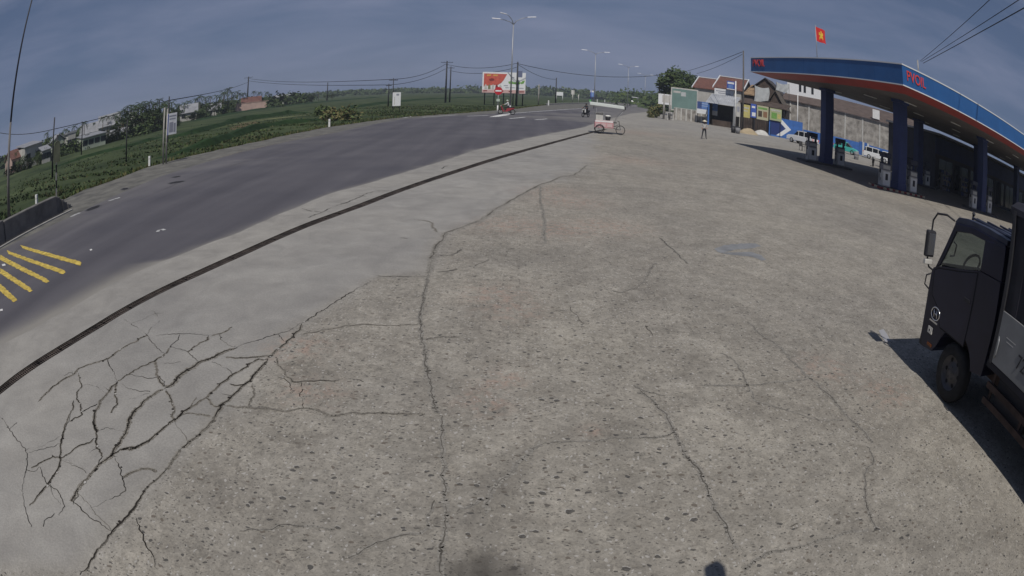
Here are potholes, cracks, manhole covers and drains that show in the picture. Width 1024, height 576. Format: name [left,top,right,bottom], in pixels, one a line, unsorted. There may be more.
crack [549,322,877,572]
crack [422,139,630,256]
crack [2,249,488,576]
